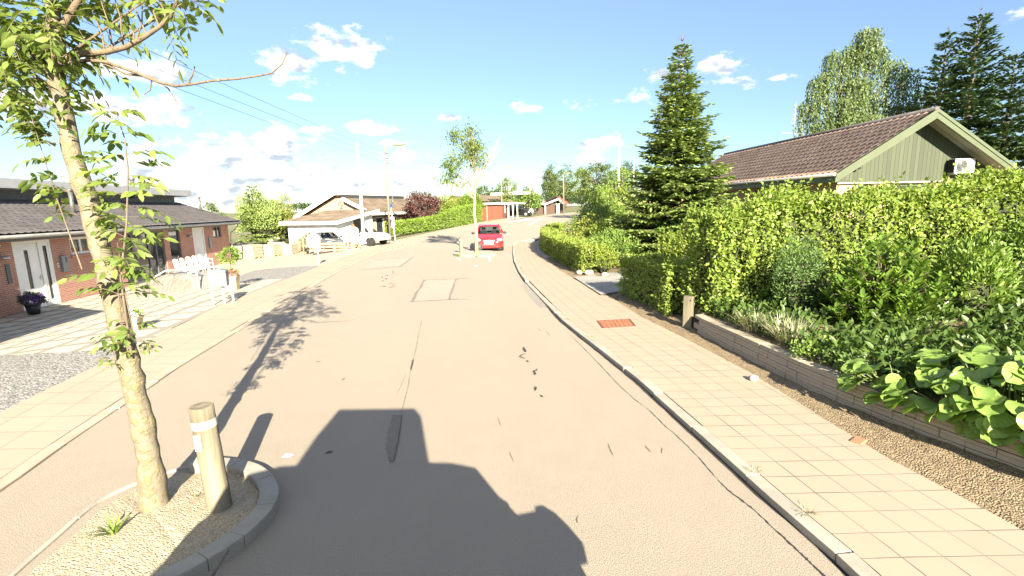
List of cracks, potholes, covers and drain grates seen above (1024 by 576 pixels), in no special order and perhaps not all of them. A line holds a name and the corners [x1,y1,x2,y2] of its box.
crack [518,328,549,397]
crack [580,344,826,576]
manhole cover [597,319,636,328]
